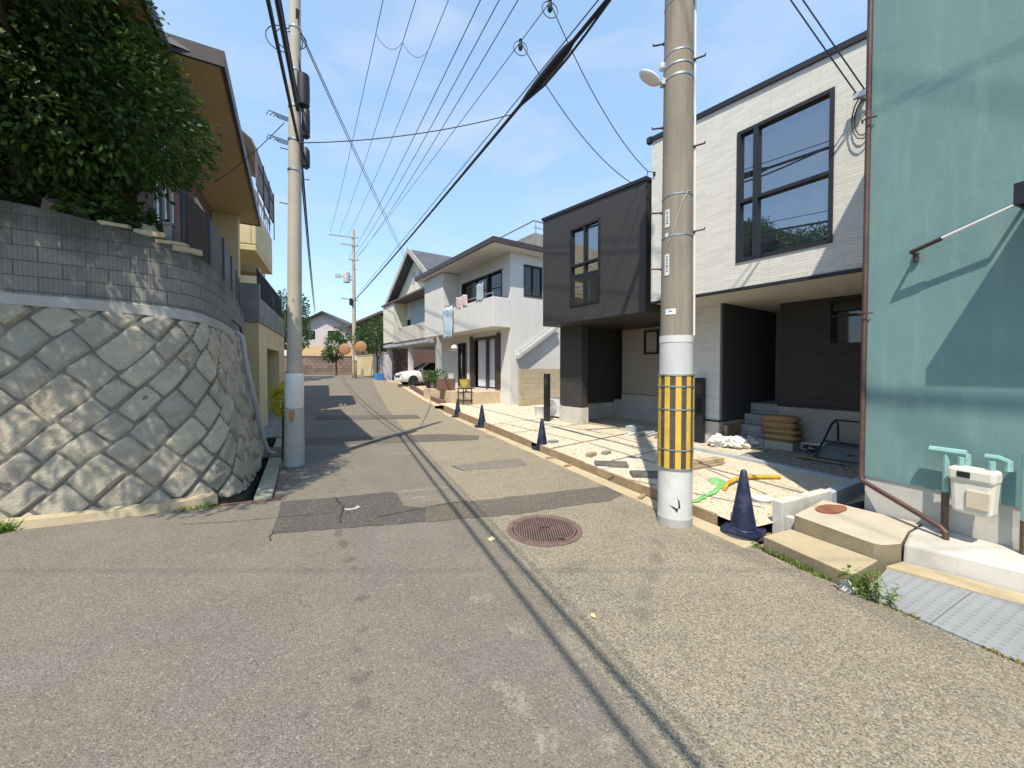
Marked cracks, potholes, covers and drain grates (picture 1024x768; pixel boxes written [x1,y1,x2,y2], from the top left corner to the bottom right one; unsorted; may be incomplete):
manhole cover [507,515,583,546]
